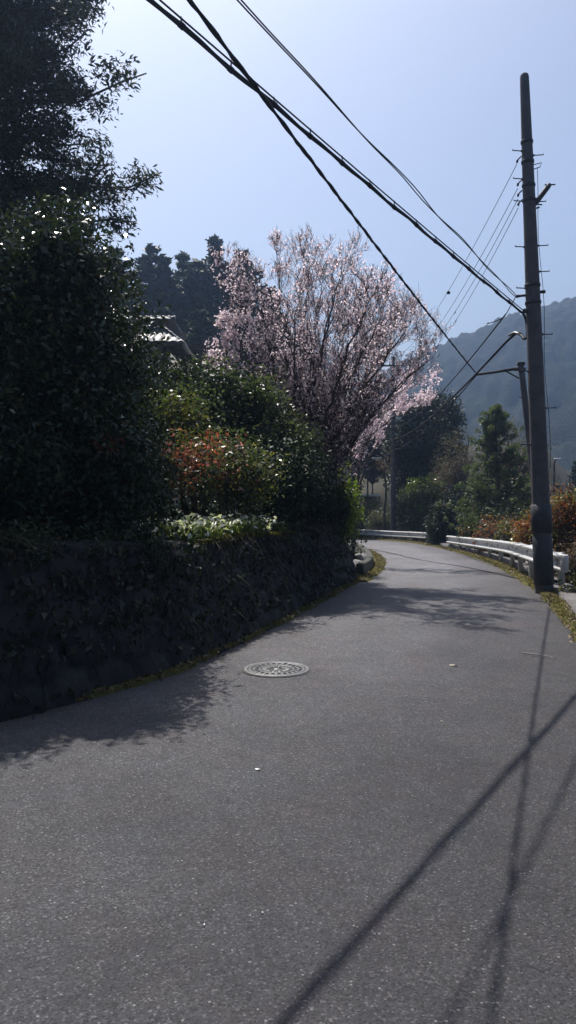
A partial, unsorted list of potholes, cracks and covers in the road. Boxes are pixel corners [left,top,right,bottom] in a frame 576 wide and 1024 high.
manhole cover [242,661,311,678]
